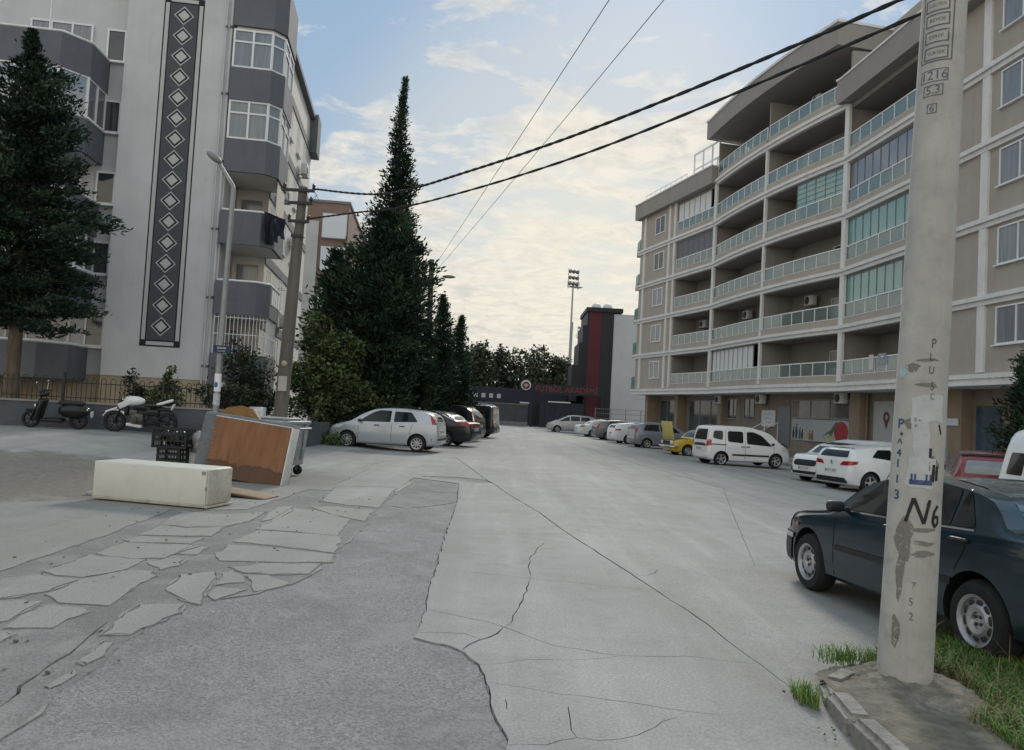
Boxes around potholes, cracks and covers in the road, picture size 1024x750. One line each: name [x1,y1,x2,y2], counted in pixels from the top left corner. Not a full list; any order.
crack [0,461,412,739]
crack [418,485,751,745]
